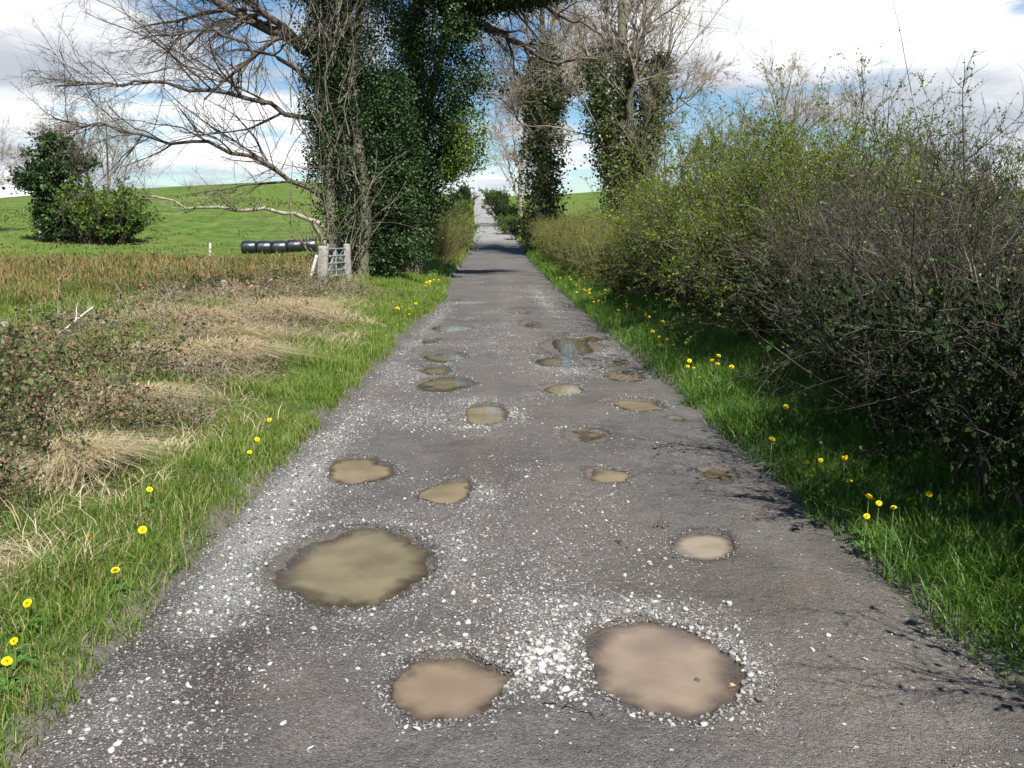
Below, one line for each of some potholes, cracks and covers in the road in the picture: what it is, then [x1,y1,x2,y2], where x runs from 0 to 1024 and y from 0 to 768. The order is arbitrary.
pothole [419,365,452,376]
pothole [542,383,583,395]
pothole [604,371,646,382]
pothole [413,375,475,392]
pothole [563,427,612,442]
pothole [390,649,516,721]
pothole [579,334,606,342]
pothole [583,617,749,720]
pothole [419,350,467,363]
pothole [671,528,735,561]
pothole [327,455,397,485]
pothole [430,324,476,333]
